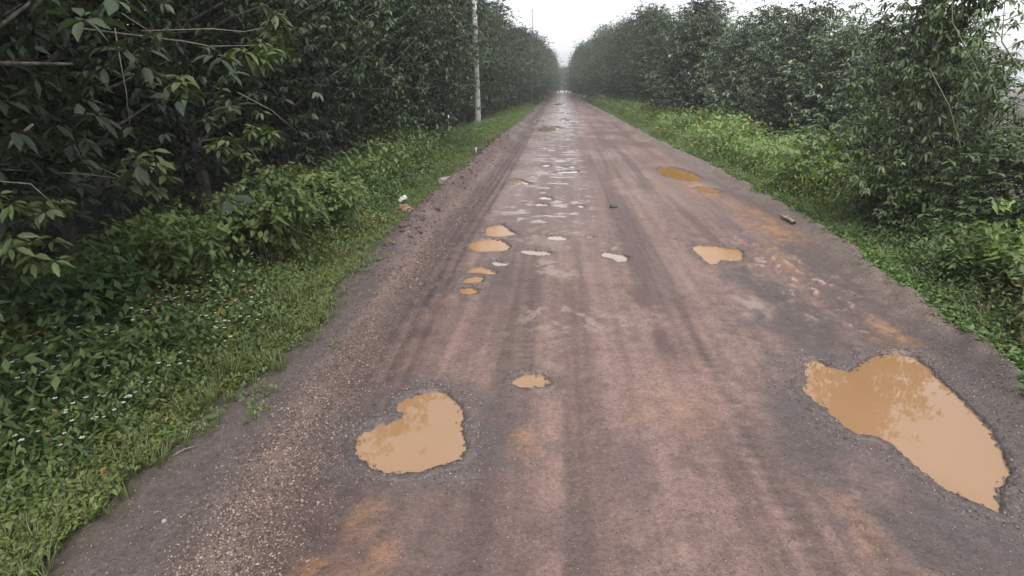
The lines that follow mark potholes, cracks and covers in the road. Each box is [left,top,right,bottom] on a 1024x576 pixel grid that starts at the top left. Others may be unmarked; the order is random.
pothole [541,233,573,242]
pothole [455,273,490,285]
pothole [594,249,634,263]
pothole [652,166,710,182]
pothole [451,284,485,297]
pothole [514,247,558,257]
pothole [686,243,749,266]
pothole [479,222,523,238]
pothole [689,186,726,194]
pothole [459,264,503,277]
pothole [503,367,559,392]
pothole [462,237,515,253]
